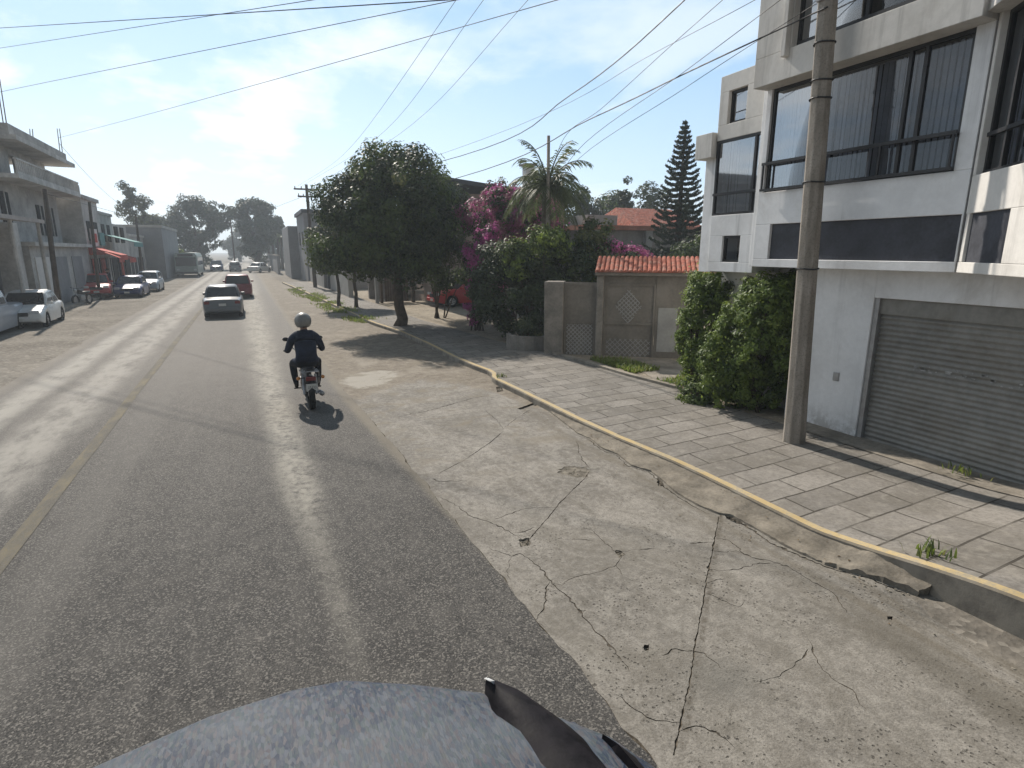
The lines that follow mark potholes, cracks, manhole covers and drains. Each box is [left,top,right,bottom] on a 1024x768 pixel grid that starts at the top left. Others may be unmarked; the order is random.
crack [706,516,904,612]
crack [343,389,735,765]
crack [754,642,863,707]
